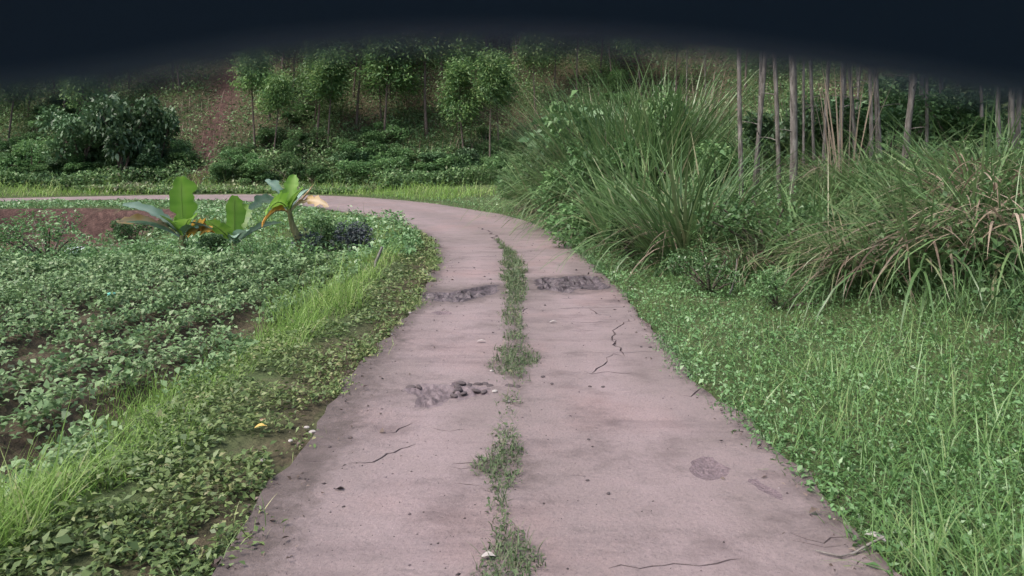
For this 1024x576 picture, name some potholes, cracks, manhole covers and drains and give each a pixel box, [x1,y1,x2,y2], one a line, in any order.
pothole [533,275,611,293]
pothole [422,285,500,302]
pothole [404,380,490,409]
crack [511,293,635,374]
crack [791,533,860,548]
crack [366,423,415,463]
crack [610,558,742,569]
